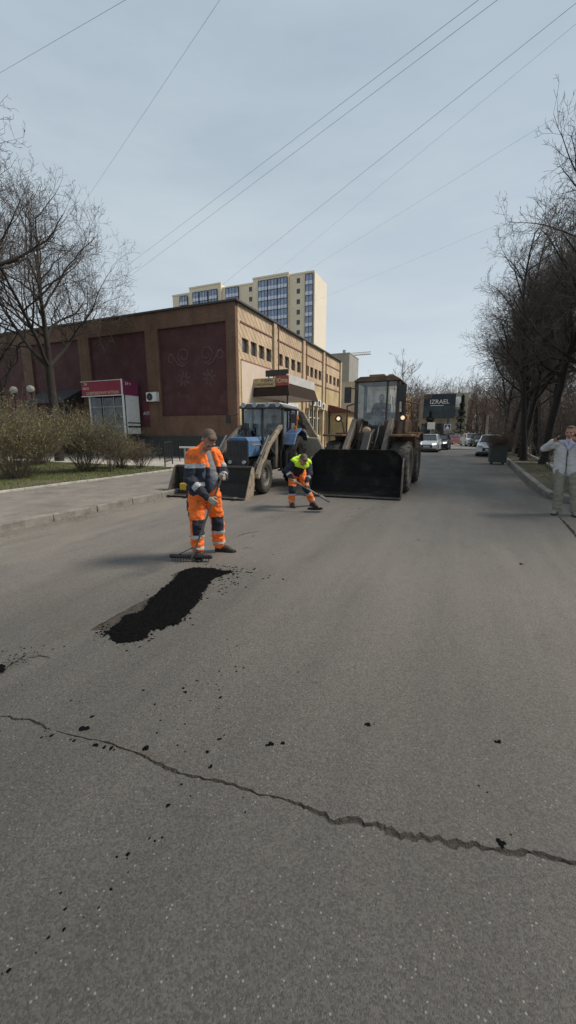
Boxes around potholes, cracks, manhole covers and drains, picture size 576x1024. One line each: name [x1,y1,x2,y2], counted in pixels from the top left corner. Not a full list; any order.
crack [0,715,576,866]
crack [5,651,50,669]
